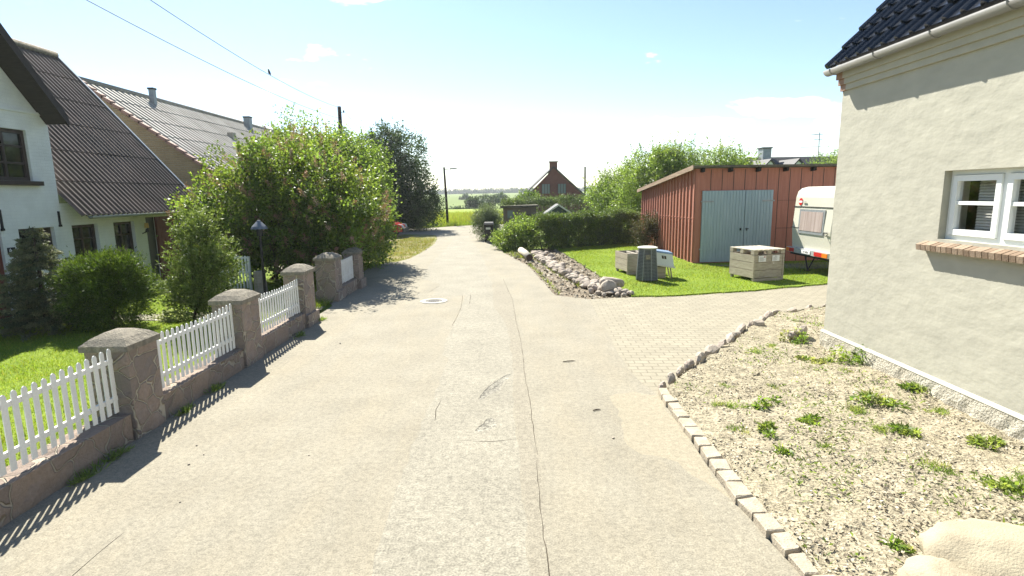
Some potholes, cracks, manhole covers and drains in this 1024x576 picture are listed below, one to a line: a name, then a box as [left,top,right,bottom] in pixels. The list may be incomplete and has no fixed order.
crack [503,279,550,576]
